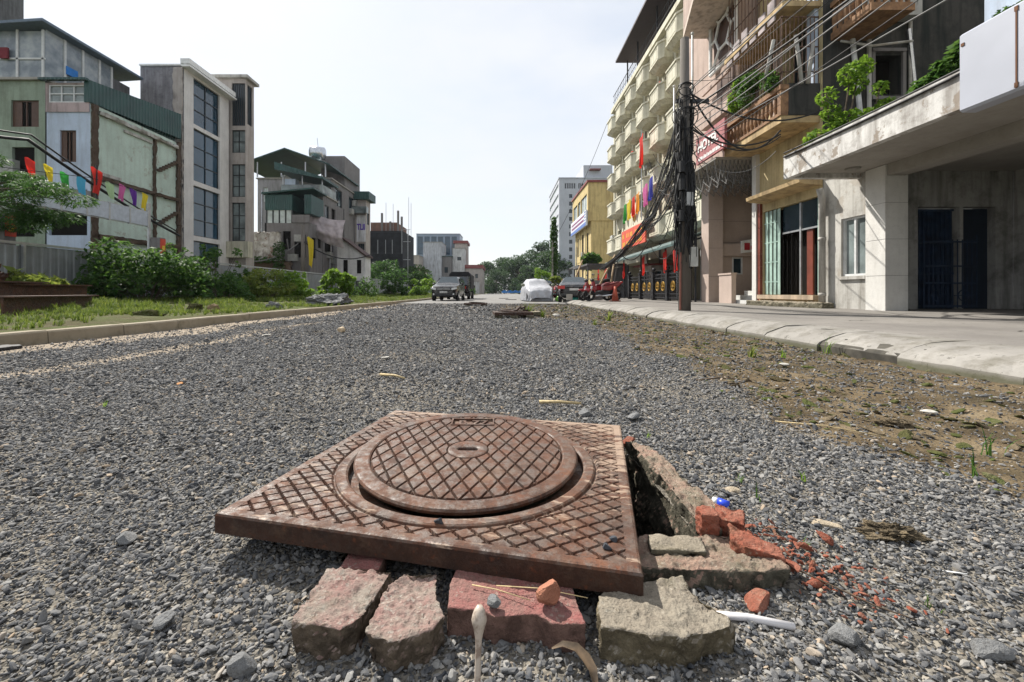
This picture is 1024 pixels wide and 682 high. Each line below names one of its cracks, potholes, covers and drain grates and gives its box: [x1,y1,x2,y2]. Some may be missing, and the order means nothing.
manhole cover [492,309,534,319]
manhole cover [215,410,643,596]
